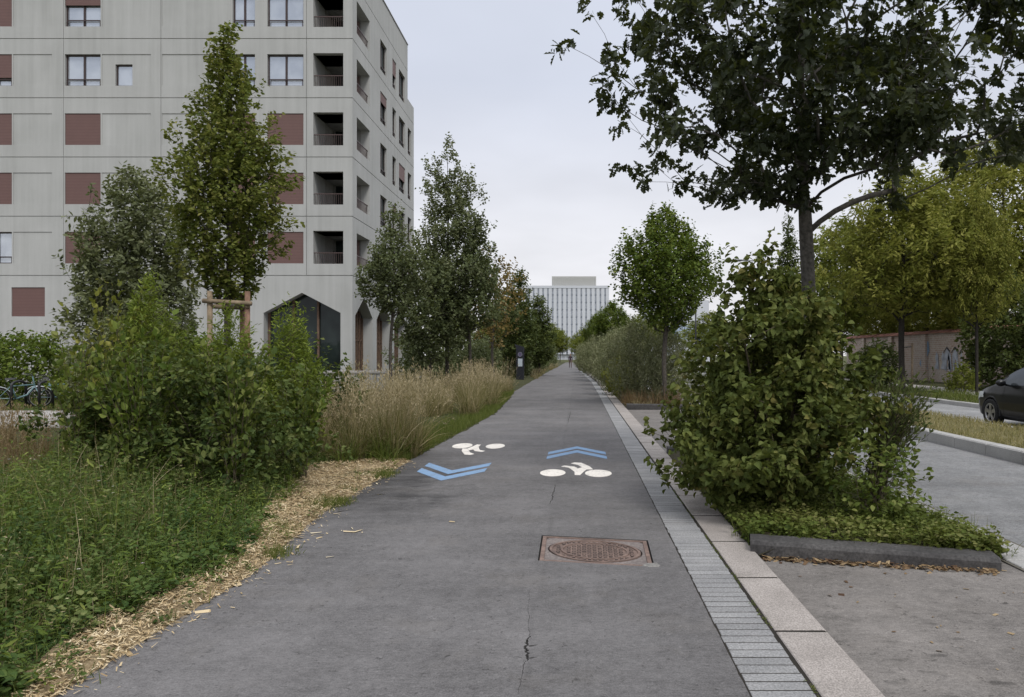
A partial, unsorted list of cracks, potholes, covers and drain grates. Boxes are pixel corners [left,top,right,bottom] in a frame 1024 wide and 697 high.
crack [518,591,536,692]
manhole cover [538,535,660,567]
